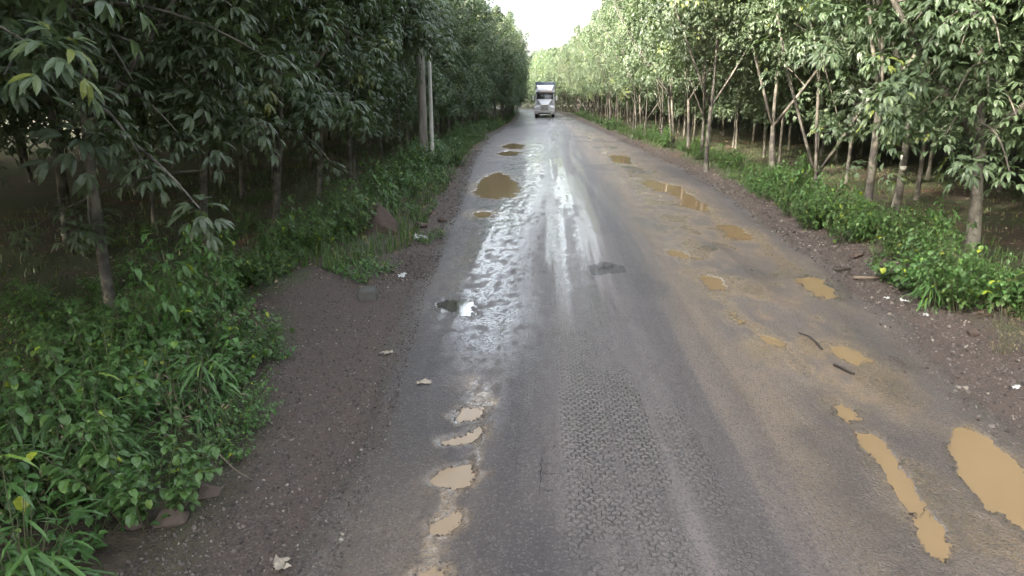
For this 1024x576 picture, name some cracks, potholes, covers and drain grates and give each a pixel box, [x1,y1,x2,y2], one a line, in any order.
pothole [809,338,884,372]
pothole [838,426,945,515]
pothole [937,420,1024,537]
pothole [423,295,487,320]
pothole [438,401,498,428]
pothole [411,455,493,501]
pothole [788,272,851,303]
pothole [465,171,526,200]
